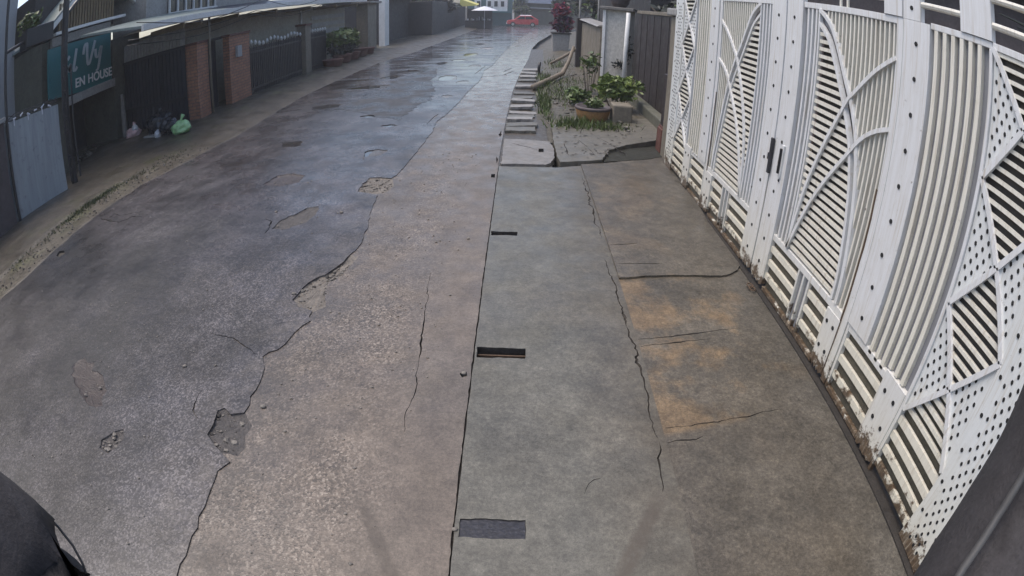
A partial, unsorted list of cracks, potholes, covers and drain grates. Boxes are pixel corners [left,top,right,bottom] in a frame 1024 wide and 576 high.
pothole [71,357,107,407]
pothole [263,173,305,187]
pothole [272,206,319,229]
pothole [208,409,252,456]
pothole [358,178,394,194]
pothole [99,429,124,453]
crack [606,262,703,492]
crack [404,274,431,431]
